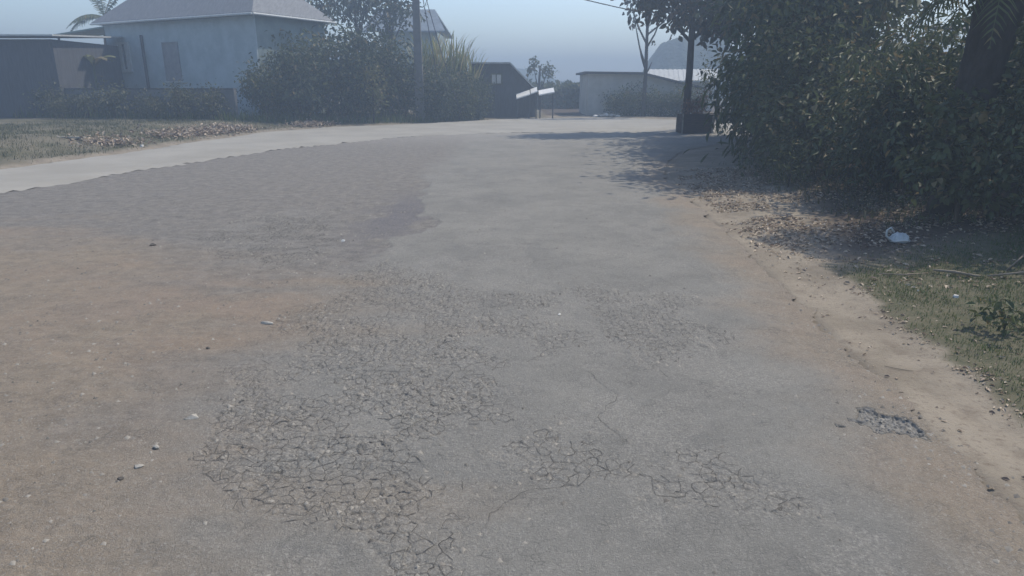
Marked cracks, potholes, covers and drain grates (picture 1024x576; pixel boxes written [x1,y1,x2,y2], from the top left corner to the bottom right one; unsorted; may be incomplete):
crack [483,428,634,528]
crack [571,287,807,377]
crack [192,262,590,576]
pothole [834,407,937,442]
